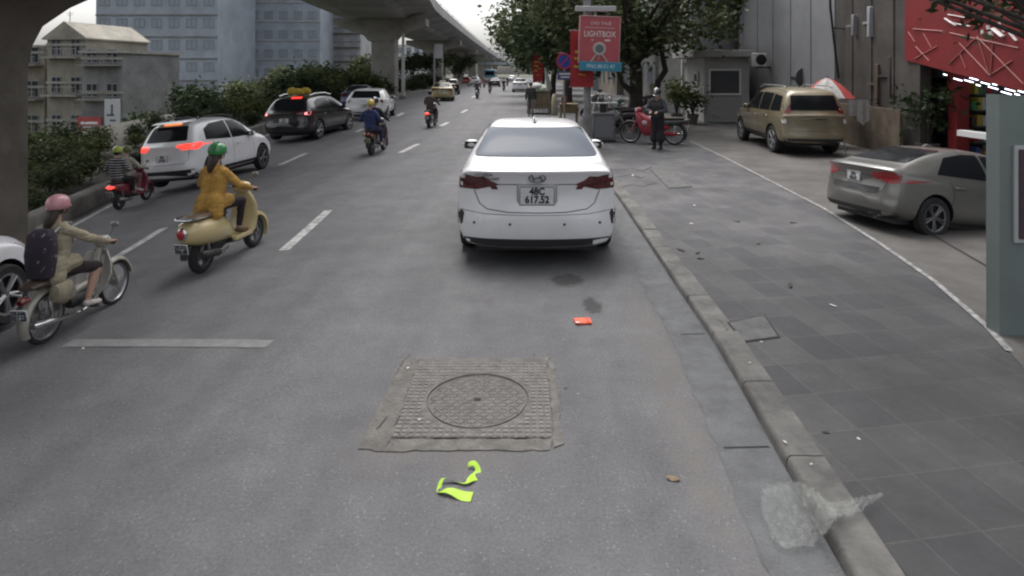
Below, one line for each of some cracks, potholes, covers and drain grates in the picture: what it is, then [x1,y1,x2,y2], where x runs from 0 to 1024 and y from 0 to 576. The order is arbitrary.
manhole cover [358,357,564,453]
